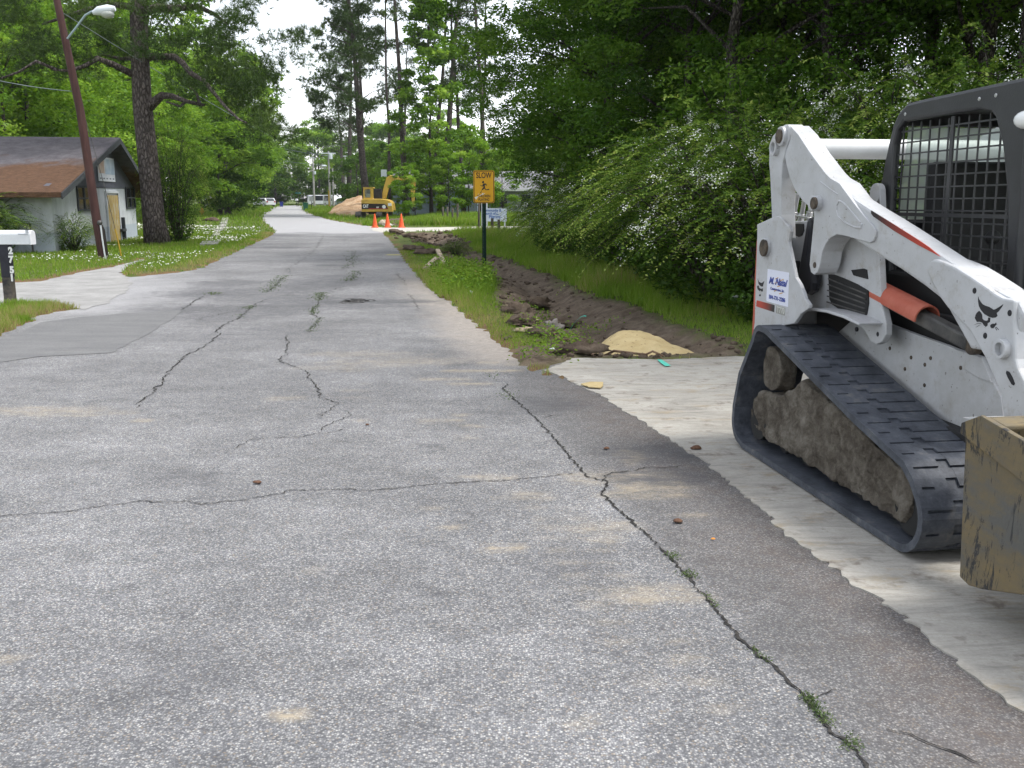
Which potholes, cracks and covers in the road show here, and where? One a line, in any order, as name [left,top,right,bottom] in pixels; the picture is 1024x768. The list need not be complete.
crack [888,729,980,763]
crack [0,371,869,768]
crack [236,335,502,448]
crack [136,240,397,408]
